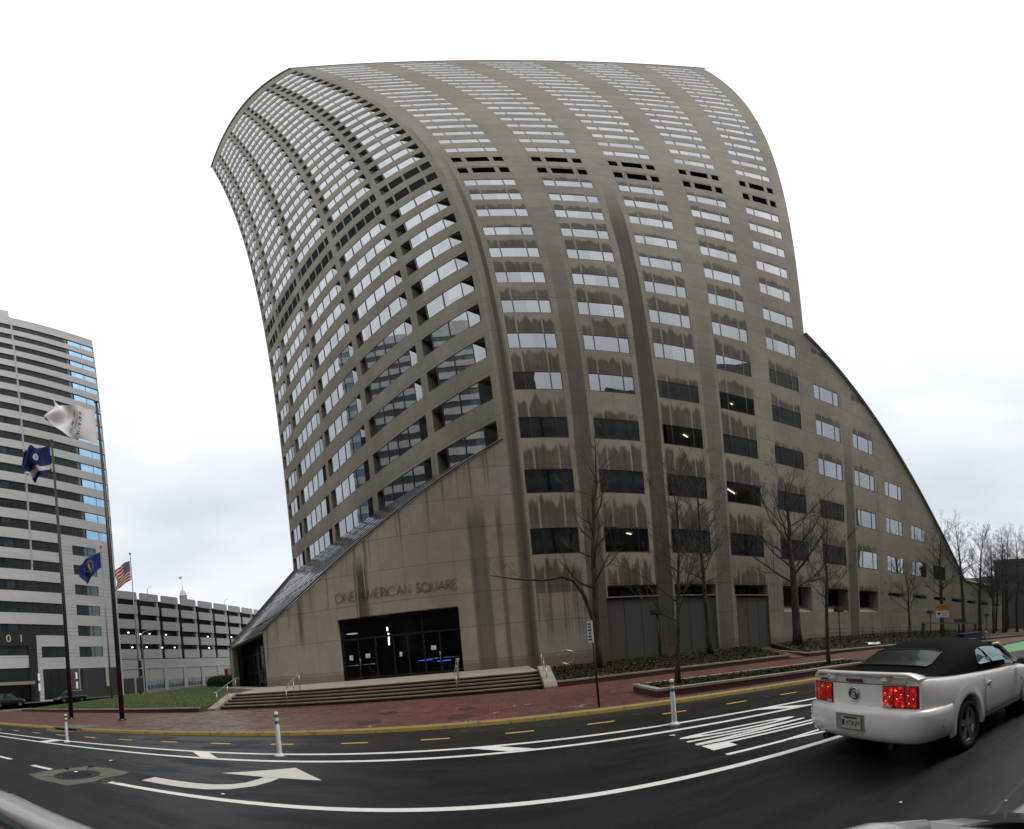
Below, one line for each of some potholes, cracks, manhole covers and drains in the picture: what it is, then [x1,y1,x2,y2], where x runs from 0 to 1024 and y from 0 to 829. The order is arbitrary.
manhole cover [54,770,100,780]
